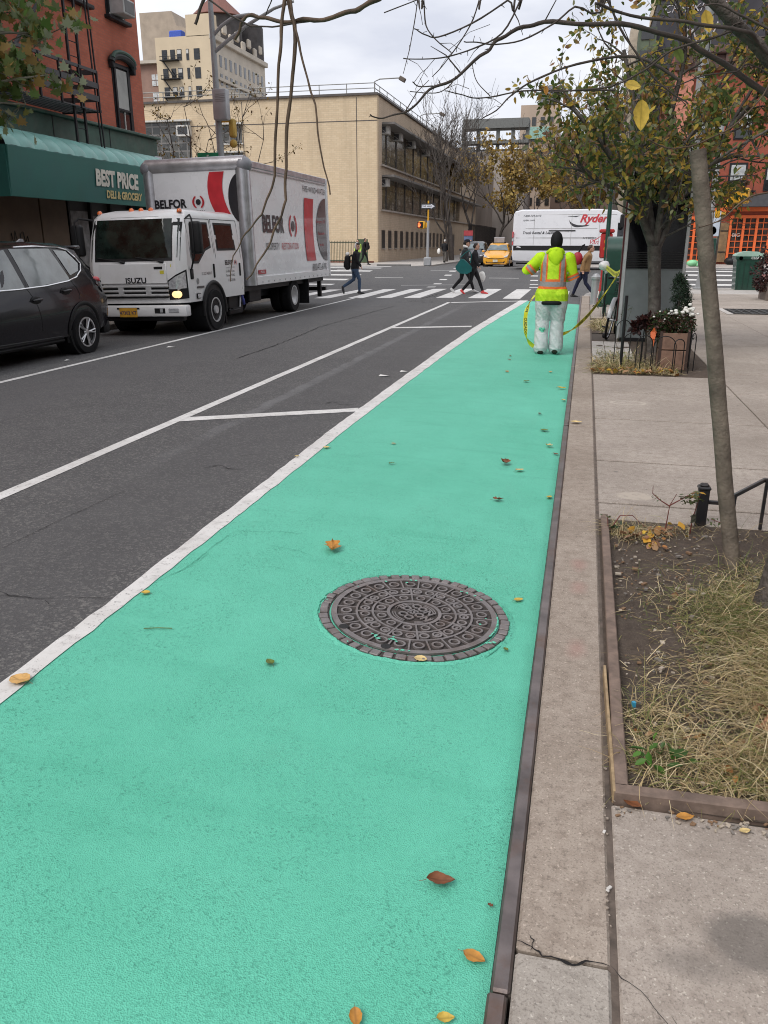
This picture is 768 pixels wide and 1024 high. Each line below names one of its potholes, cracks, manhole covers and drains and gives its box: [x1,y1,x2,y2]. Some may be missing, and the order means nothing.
crack [517,936,676,1024]
manhole cover [313,574,516,666]
